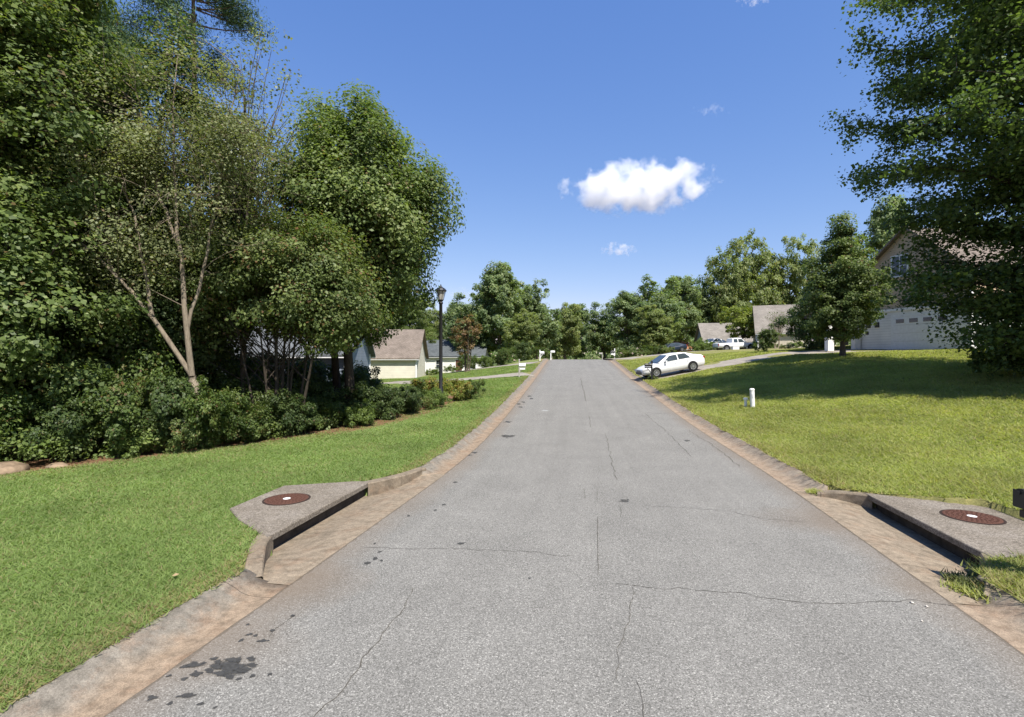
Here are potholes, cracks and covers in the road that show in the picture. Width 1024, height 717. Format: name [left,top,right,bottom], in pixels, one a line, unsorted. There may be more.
crack [313,587,413,717]
drain grate [795,490,1024,606]
manhole cover [939,509,1007,525]
crack [615,583,954,679]
manhole cover [262,493,311,506]
drain grate [230,467,445,585]
